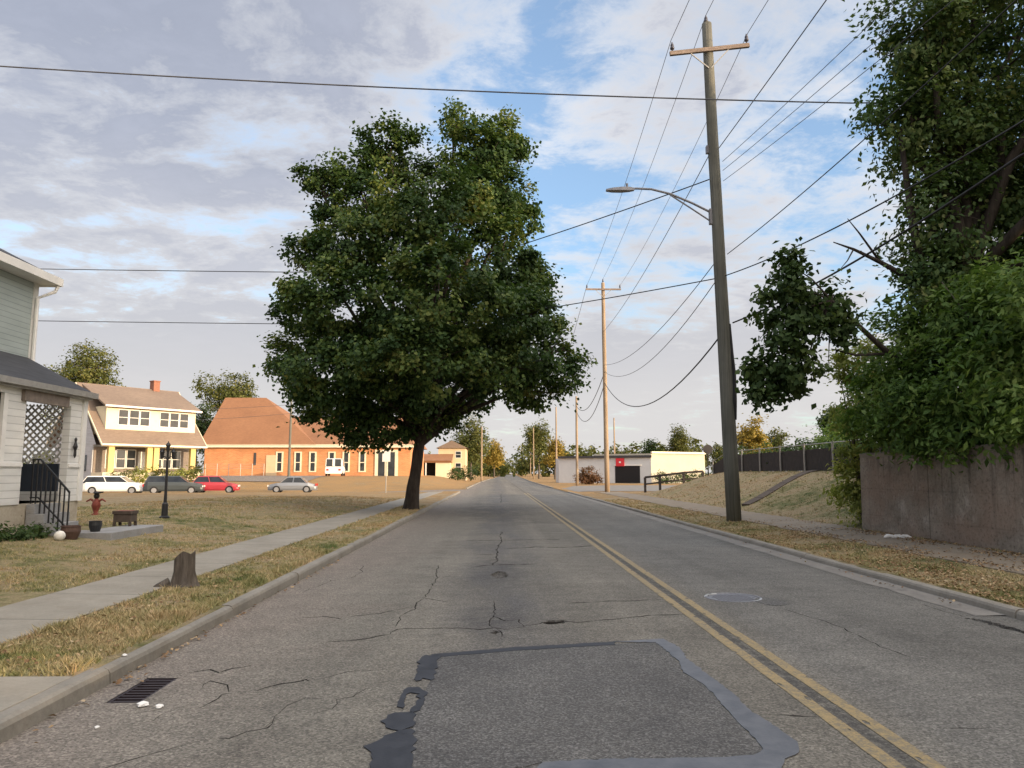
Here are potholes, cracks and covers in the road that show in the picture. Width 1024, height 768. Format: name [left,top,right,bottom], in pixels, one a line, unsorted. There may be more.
crack [305,567,678,642]
crack [788,610,909,657]
drain grate [107,678,177,703]
crack [106,665,384,768]
crack [466,532,584,567]
manhole cover [704,593,762,602]
